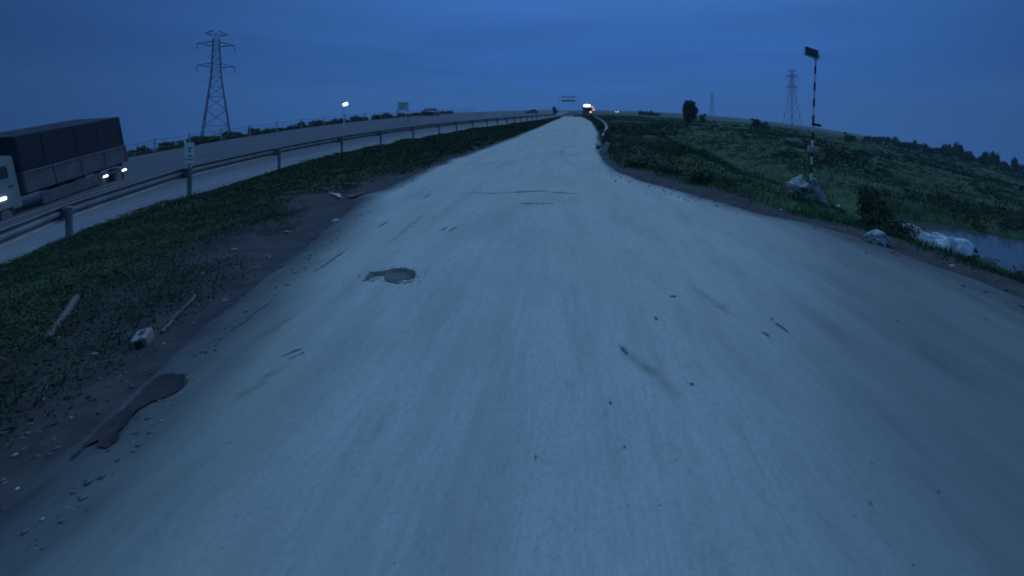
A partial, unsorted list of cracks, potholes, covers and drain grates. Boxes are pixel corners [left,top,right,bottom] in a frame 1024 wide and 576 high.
pothole [71,372,187,458]
pothole [365,268,416,283]
